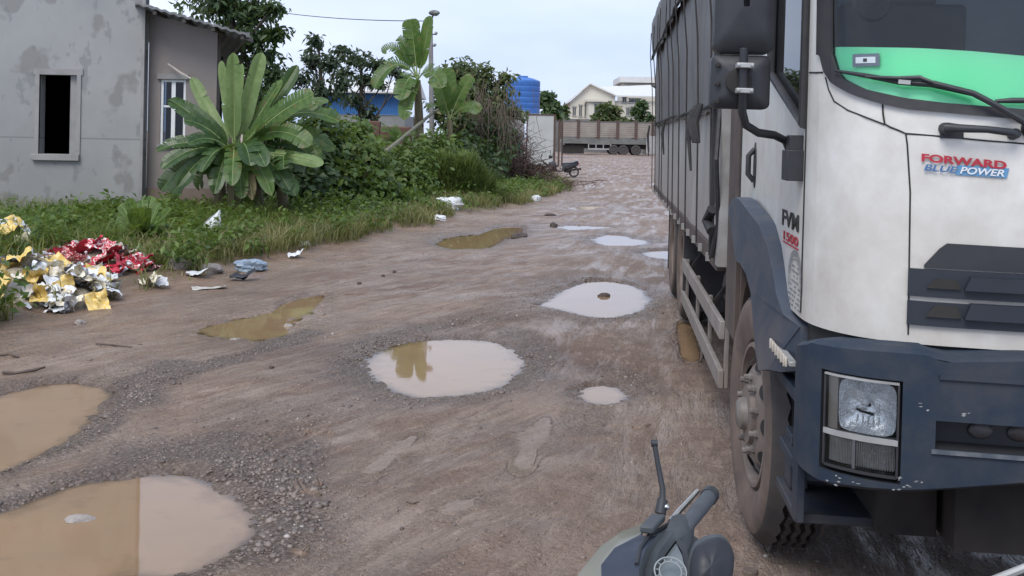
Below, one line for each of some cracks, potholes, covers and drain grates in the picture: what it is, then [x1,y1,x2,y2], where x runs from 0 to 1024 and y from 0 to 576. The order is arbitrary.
pothole [320,330,568,404]
pothole [618,246,668,260]
pothole [0,457,305,576]
pothole [414,224,543,251]
pothole [172,291,334,345]
pothole [535,223,629,231]
pothole [564,231,668,247]
pothole [0,373,143,476]
pothole [518,276,677,320]
pothole [663,319,713,364]
